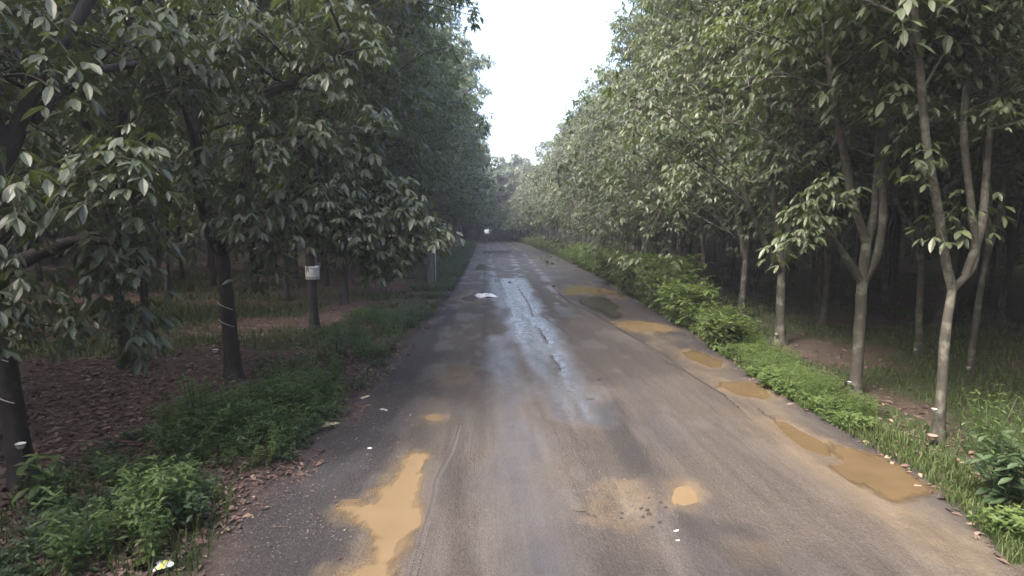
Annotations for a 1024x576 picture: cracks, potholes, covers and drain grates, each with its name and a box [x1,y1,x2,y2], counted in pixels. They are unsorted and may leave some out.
pothole [322,451,432,576]
pothole [609,320,677,333]
pothole [763,417,836,461]
pothole [559,285,629,299]
